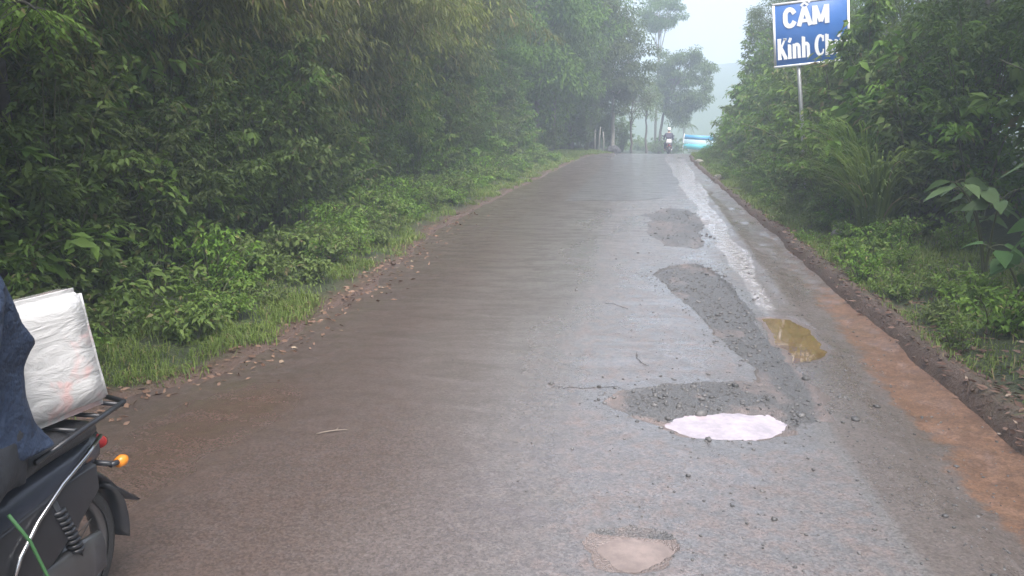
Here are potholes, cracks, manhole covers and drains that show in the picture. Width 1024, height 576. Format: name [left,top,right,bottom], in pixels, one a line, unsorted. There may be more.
pothole [579,372,833,450]
pothole [579,519,704,576]
pothole [640,208,720,249]
pothole [641,262,860,426]
